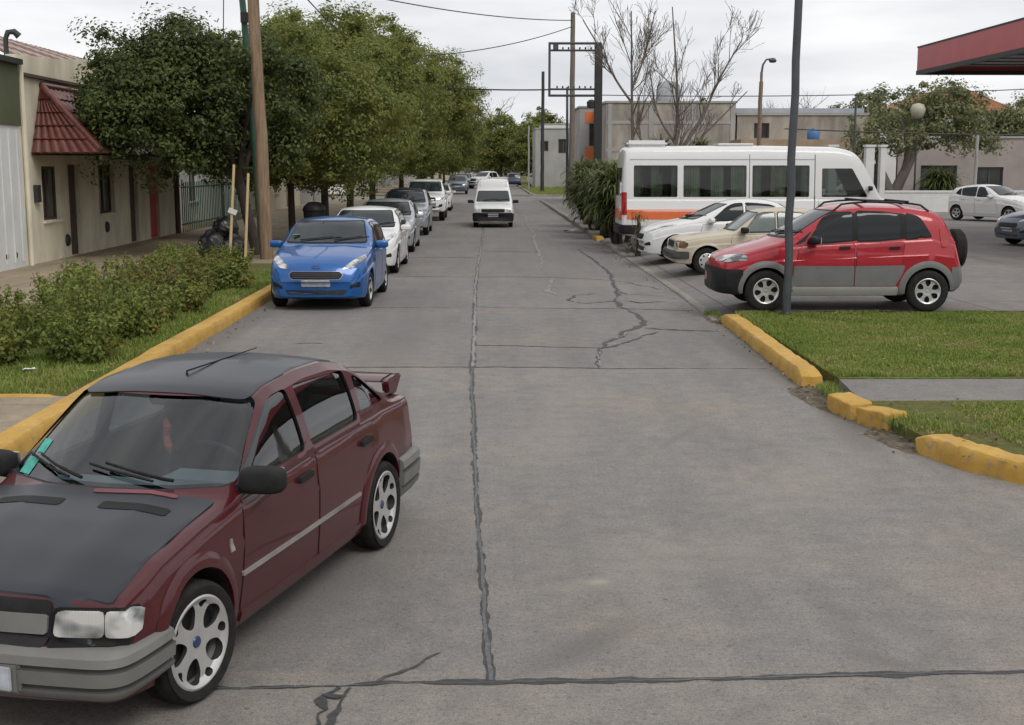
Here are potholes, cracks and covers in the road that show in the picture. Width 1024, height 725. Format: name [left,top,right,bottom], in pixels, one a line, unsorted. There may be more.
crack [378,249,768,369]
